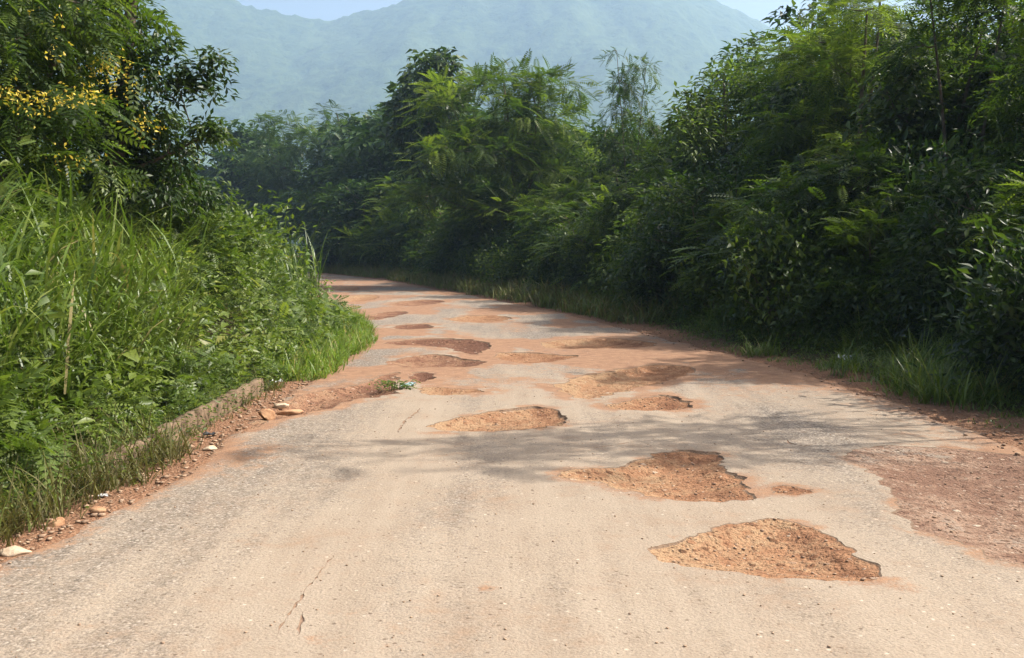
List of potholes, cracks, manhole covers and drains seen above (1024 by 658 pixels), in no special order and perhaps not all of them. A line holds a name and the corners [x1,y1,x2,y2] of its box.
pothole [557,450,757,502]
crack [274,556,334,640]
pothole [385,354,486,368]
pothole [603,394,693,411]
pothole [553,365,696,399]
pothole [539,338,657,349]
pothole [365,311,408,320]
pothole [493,352,578,363]
pothole [647,518,882,582]
pothole [384,338,492,355]
